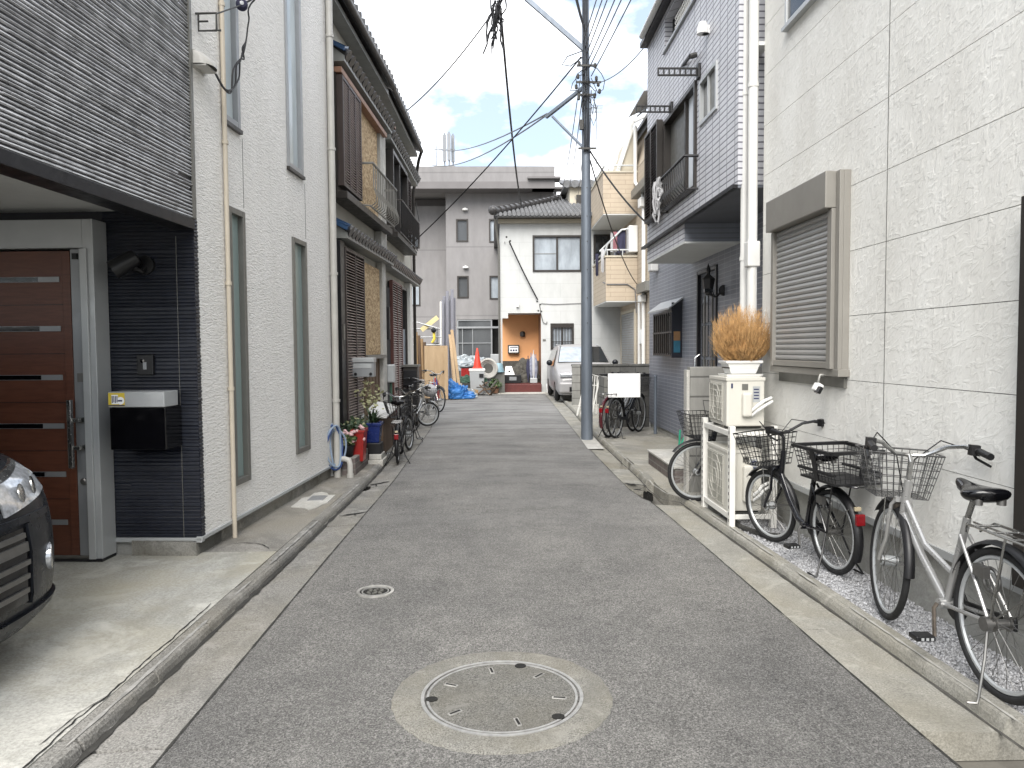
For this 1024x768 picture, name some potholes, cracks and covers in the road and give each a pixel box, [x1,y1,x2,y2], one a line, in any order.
manhole cover [356,585,394,598]
manhole cover [391,651,613,755]
